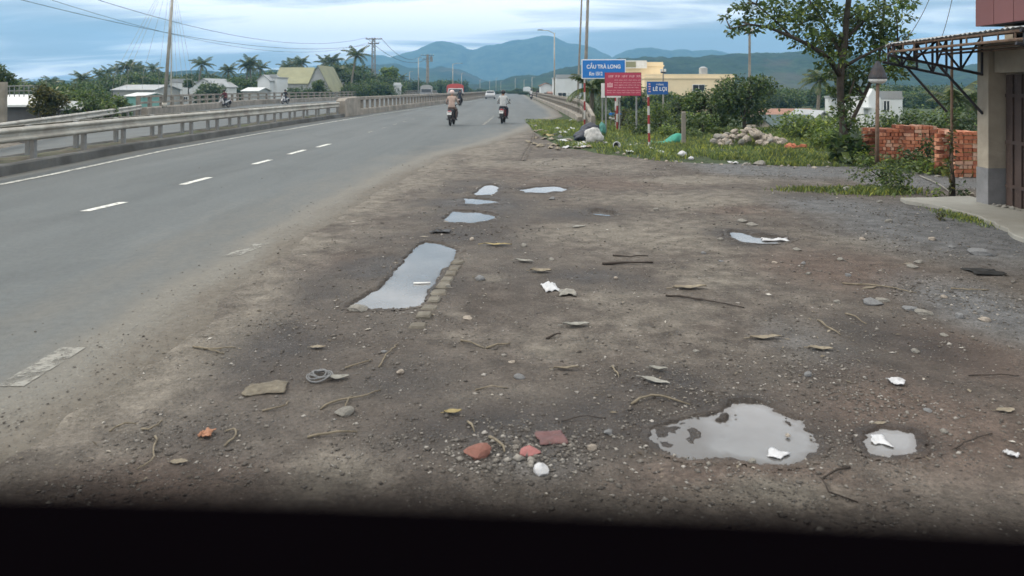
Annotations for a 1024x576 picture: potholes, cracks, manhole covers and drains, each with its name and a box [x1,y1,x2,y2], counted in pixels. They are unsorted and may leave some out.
pothole [433,208,511,225]
pothole [722,229,801,245]
pothole [337,239,467,312]
pothole [514,184,576,194]
pothole [639,394,832,473]
pothole [580,207,627,217]
pothole [853,423,932,464]
pothole [454,196,509,206]
pothole [465,182,507,197]
